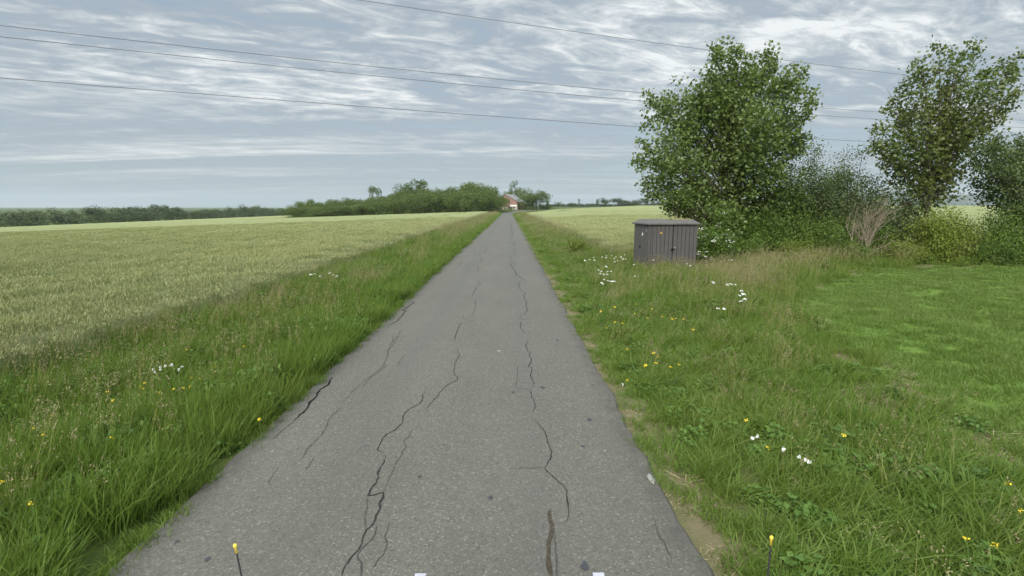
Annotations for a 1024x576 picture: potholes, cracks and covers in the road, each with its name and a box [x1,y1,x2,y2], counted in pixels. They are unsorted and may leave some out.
crack [341,247,488,576]
crack [505,228,569,576]
crack [273,303,418,469]
